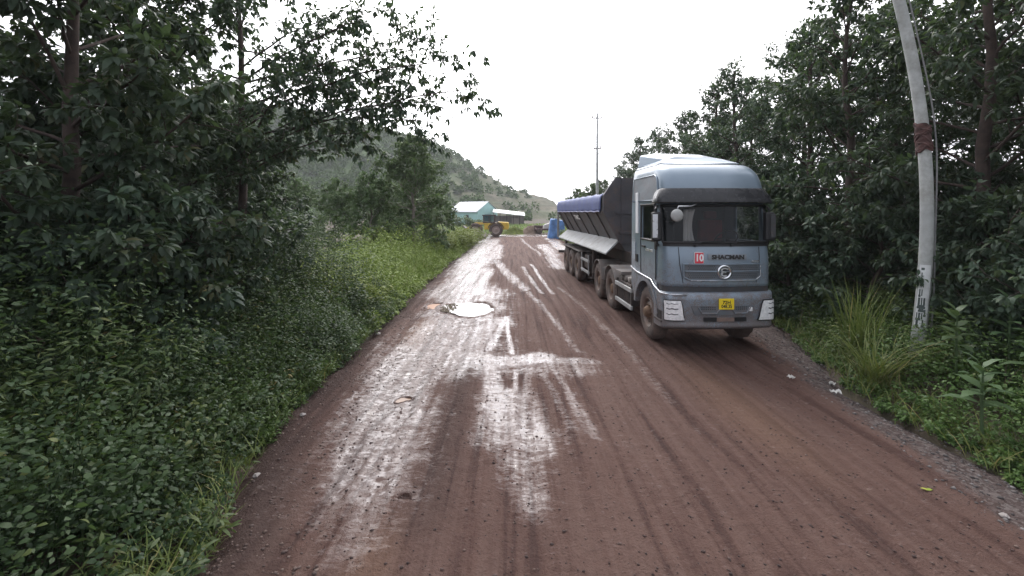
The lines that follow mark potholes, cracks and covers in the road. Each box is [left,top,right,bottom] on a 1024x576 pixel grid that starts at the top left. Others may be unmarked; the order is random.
pothole [435,301,498,319]
